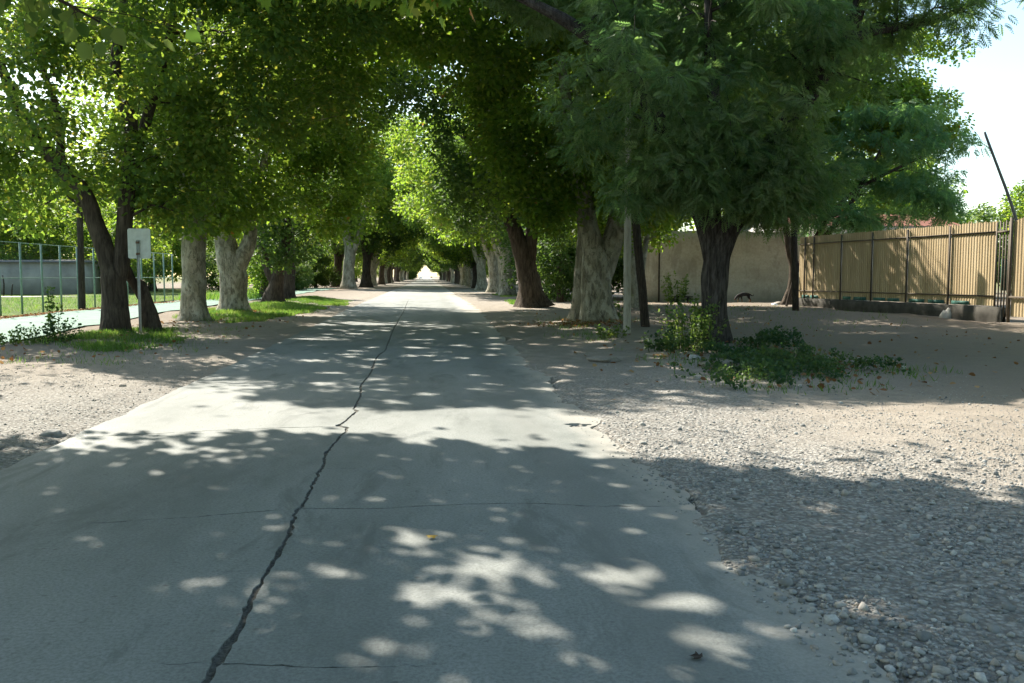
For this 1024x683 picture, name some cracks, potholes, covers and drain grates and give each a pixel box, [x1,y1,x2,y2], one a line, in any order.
crack [86,303,657,683]
